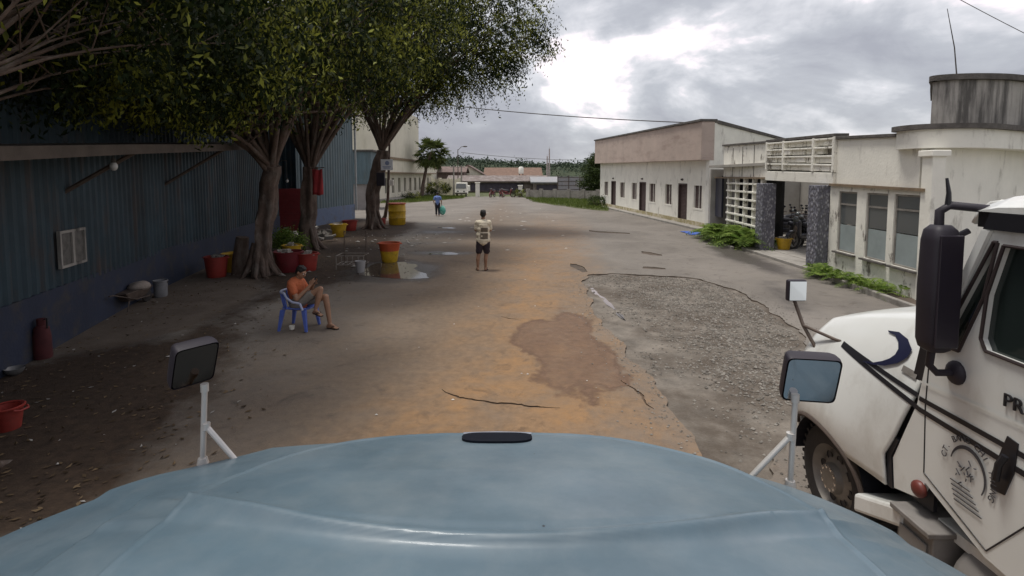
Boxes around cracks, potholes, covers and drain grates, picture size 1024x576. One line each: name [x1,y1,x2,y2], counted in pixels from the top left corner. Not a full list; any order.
pothole [560,269,817,488]
crack [621,380,654,409]
crack [442,389,553,408]
